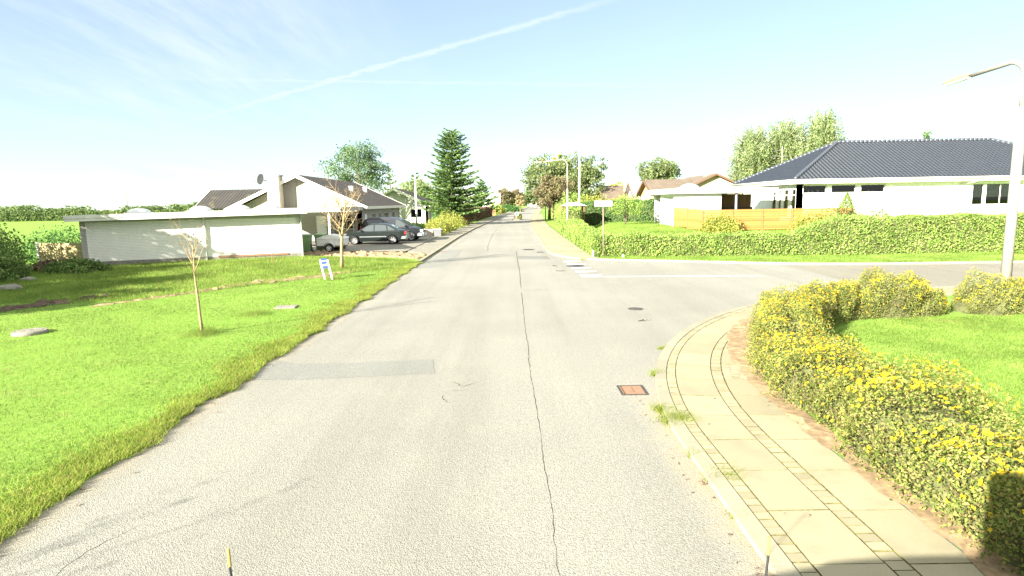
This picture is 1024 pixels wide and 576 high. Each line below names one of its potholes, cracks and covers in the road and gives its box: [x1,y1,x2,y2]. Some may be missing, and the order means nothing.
crack [516,252,560,575]
